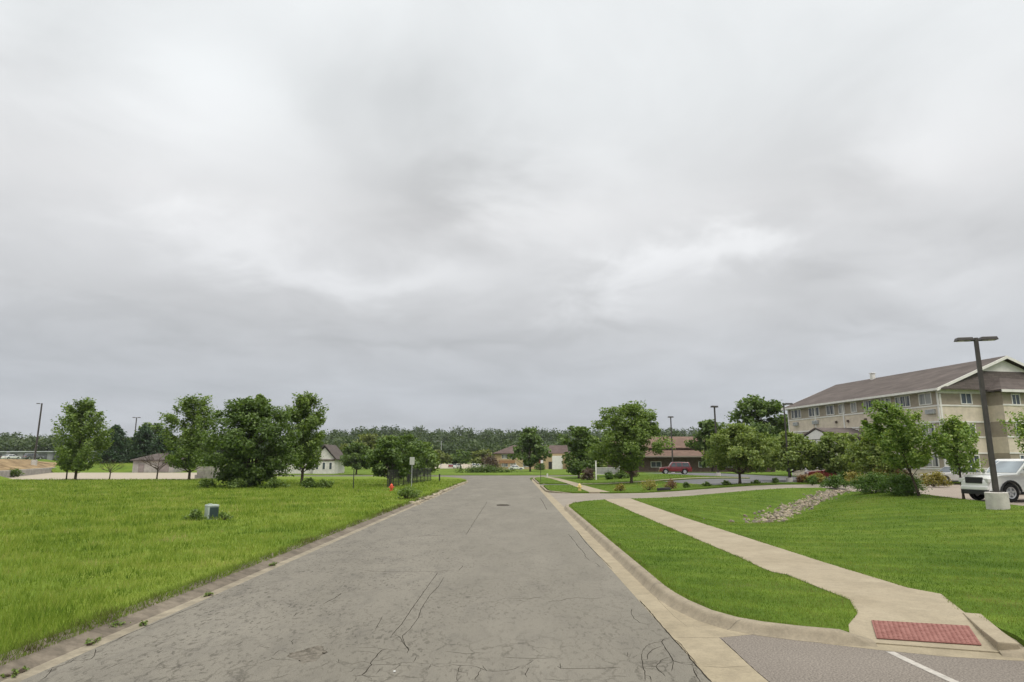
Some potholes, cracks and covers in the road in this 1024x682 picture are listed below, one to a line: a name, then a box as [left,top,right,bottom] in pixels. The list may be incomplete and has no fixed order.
crack [321,566,532,679]
crack [550,640,700,681]
